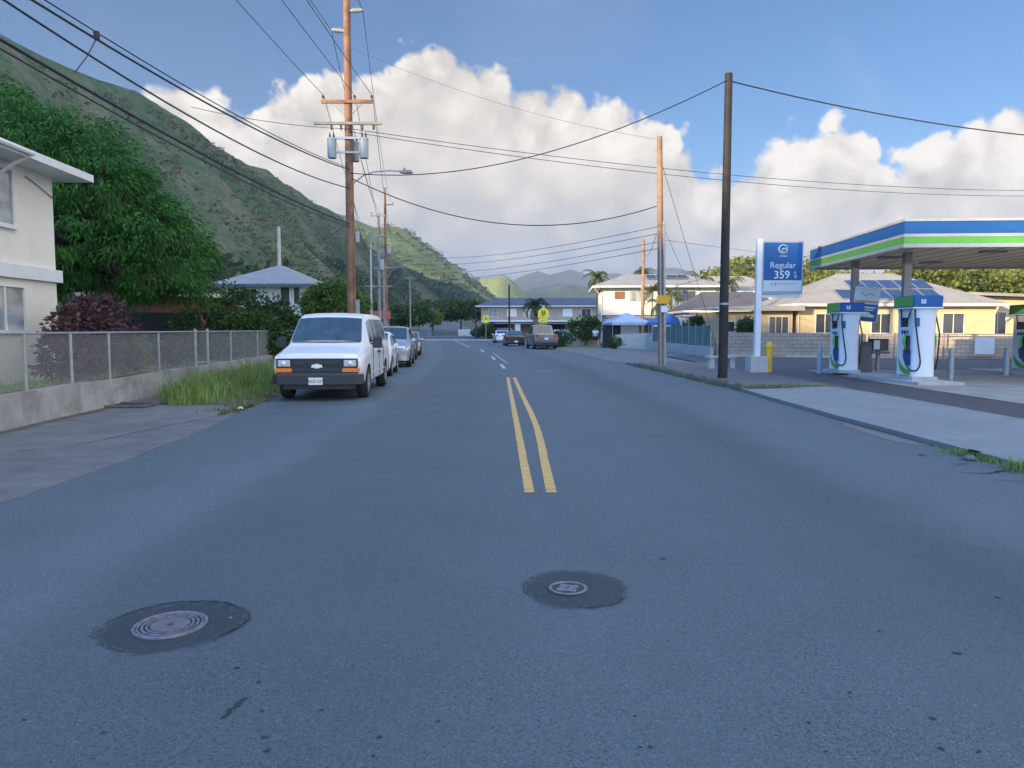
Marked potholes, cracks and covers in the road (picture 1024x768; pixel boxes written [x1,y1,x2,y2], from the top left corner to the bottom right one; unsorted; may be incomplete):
manhole cover [131,611,208,640]
utility cover [547,581,589,596]
